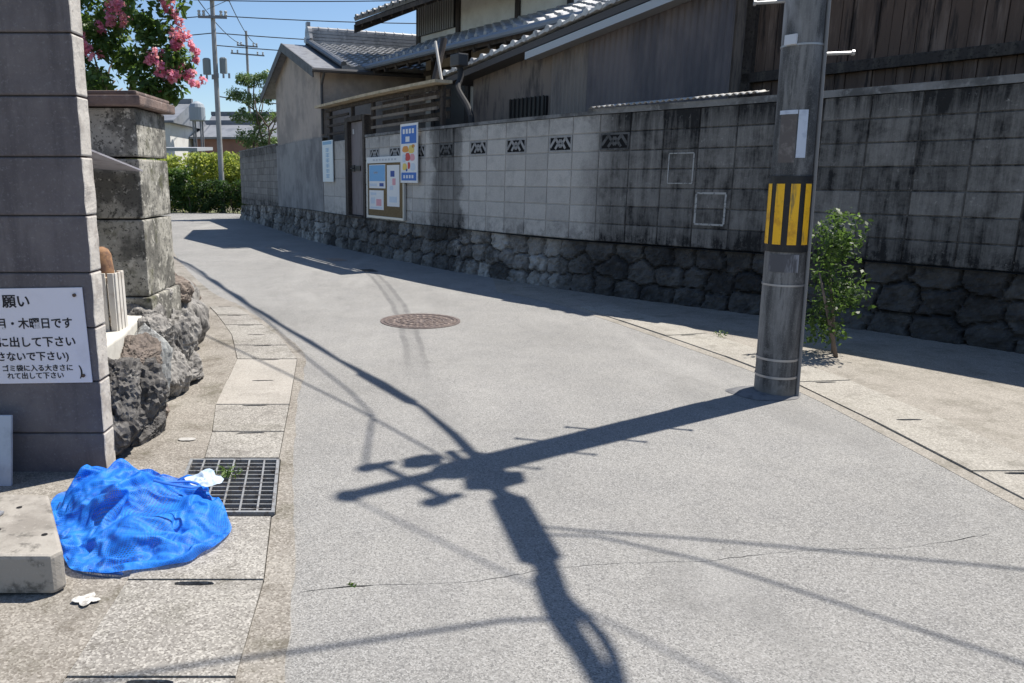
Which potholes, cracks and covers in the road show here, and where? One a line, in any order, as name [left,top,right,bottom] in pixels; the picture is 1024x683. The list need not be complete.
crack [306,534,986,592]
drain grate [170,459,280,519]
manhole cover [380,313,460,329]
